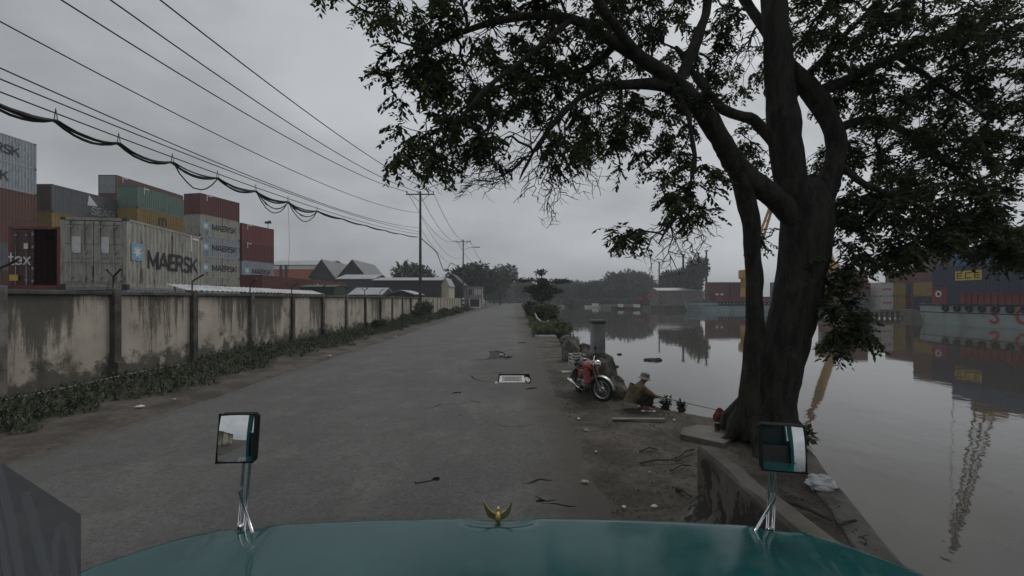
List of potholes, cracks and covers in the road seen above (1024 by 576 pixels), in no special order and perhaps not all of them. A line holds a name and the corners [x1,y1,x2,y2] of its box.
pothole [483,349,532,360]
crack [522,479,574,507]
